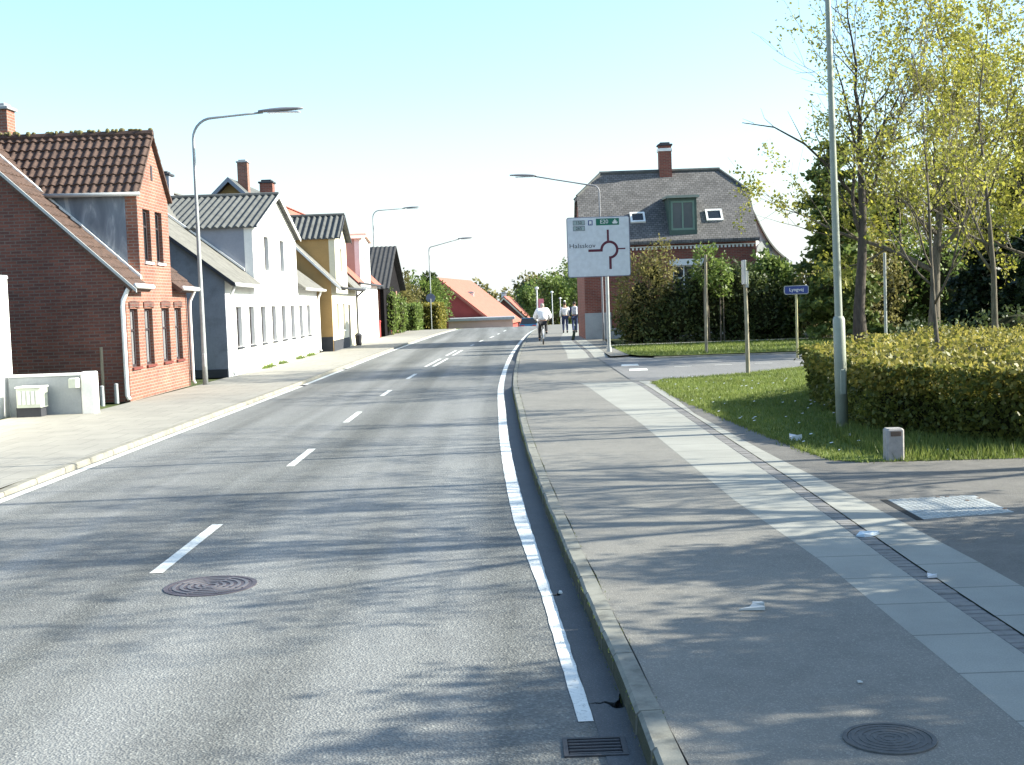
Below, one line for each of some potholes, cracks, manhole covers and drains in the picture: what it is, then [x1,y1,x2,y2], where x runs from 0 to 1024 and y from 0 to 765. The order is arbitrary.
drain grate [562,736,629,758]
manhole cover [842,722,937,755]
crack [589,694,623,708]
manhole cover [163,575,257,597]
